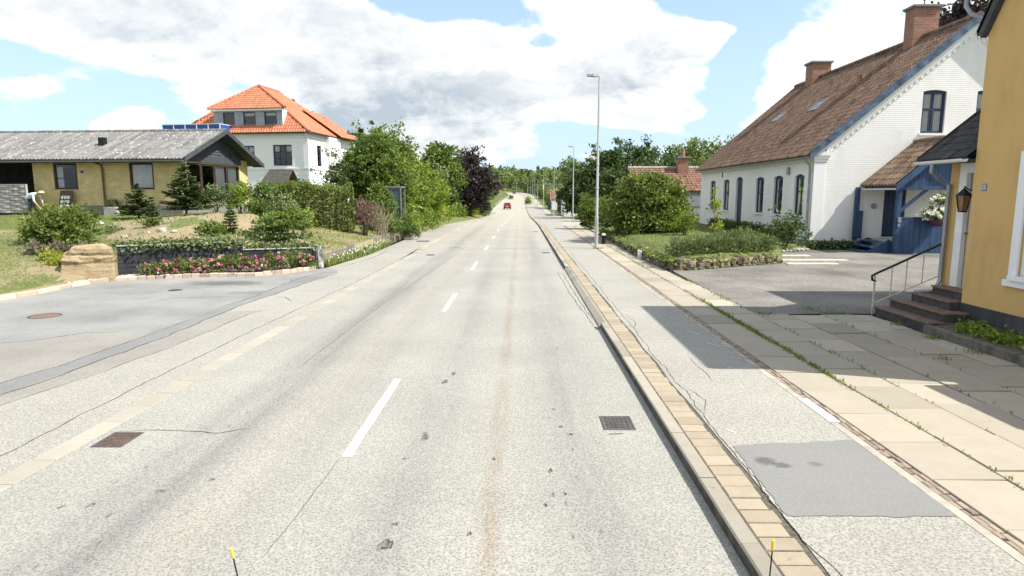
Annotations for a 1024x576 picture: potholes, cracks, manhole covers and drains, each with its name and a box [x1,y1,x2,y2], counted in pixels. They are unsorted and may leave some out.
pothole [376,539,394,552]
crack [109,427,255,435]
crack [262,460,338,558]
